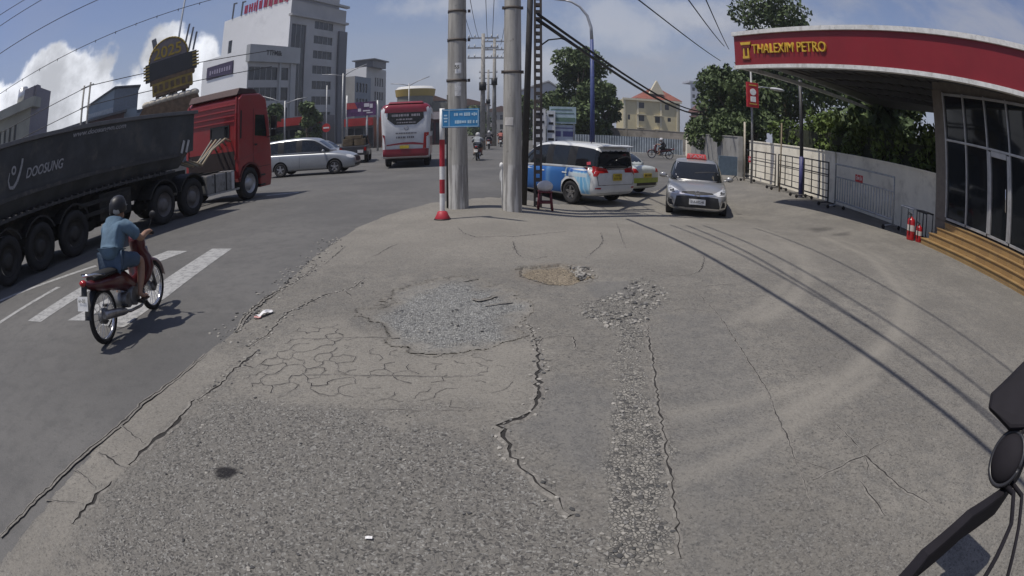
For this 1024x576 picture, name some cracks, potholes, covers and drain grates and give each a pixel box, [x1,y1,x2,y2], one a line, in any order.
crack [128,246,578,517]
pothole [515,263,599,286]
crack [458,228,566,259]
crack [645,308,716,559]
crack [792,421,941,519]
